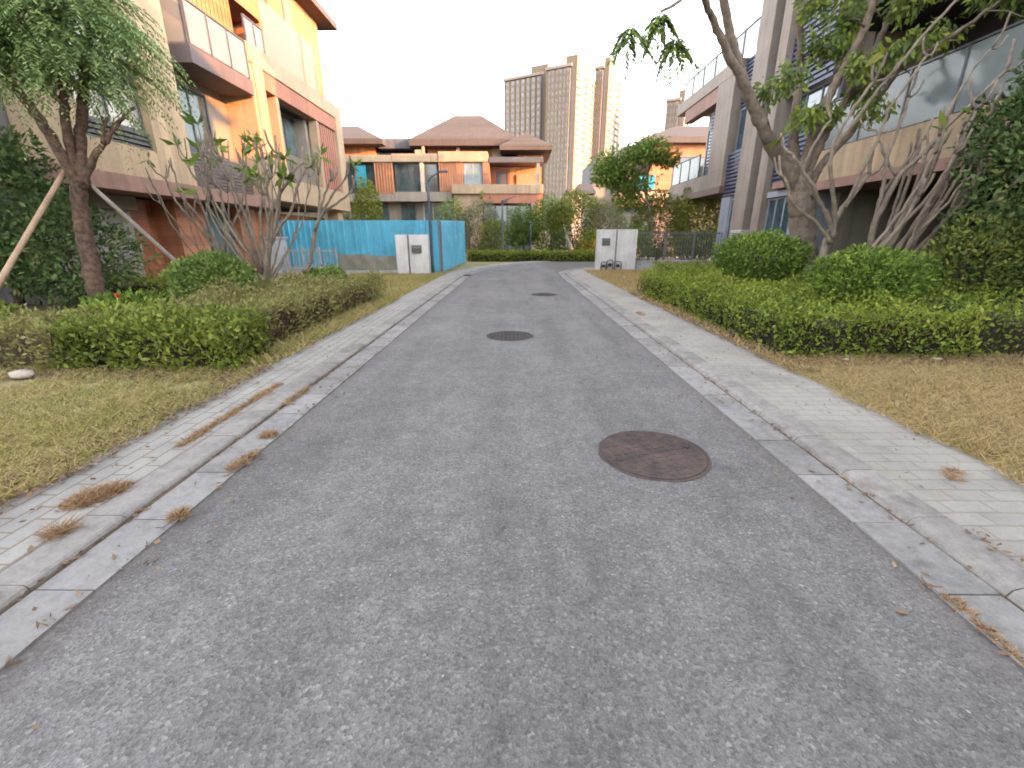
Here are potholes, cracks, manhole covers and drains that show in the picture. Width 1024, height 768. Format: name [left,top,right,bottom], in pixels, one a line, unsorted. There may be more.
manhole cover [486,331,534,341]
manhole cover [598,431,712,482]
